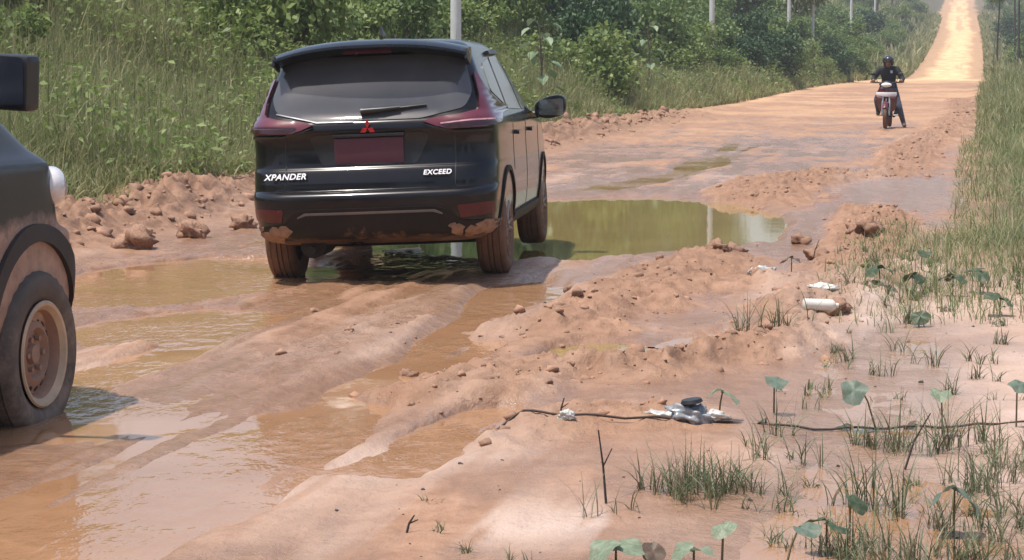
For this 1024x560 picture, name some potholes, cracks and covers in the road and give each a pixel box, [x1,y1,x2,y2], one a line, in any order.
pothole [72,252,343,309]
pothole [393,189,812,262]
